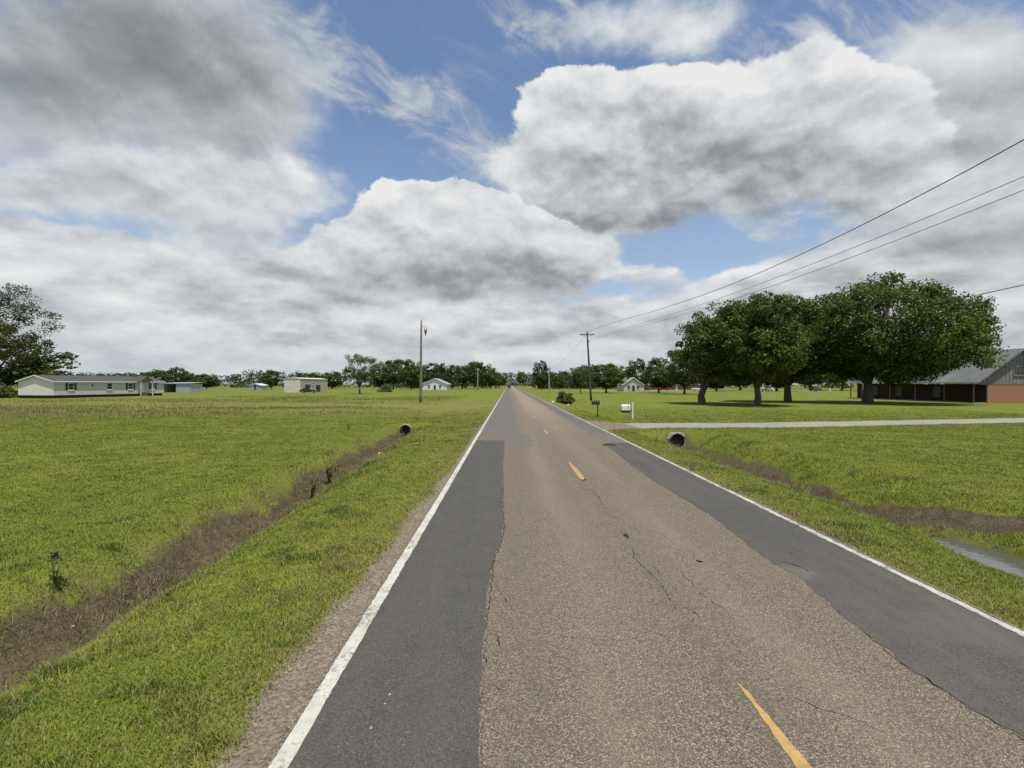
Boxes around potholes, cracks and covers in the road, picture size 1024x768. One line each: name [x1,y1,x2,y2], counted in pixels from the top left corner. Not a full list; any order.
crack [478,446,507,765]
crack [792,697,880,731]
crack [632,549,729,618]
crack [822,600,1024,740]
